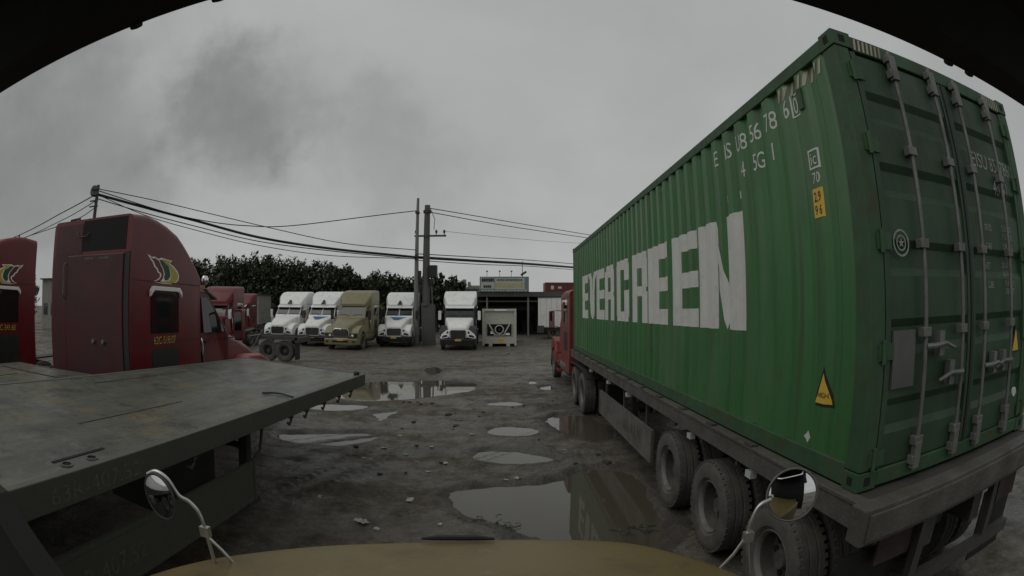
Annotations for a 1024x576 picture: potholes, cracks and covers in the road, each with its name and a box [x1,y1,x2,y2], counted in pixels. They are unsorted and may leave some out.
pothole [460,444,568,466]
pothole [417,365,448,376]
pothole [361,407,407,422]
pothole [309,400,377,412]
pothole [428,461,695,552]
pothole [533,411,624,442]
pothole [475,398,531,406]
pothole [477,422,549,437]
pothole [336,377,485,402]
pothole [265,427,390,447]
